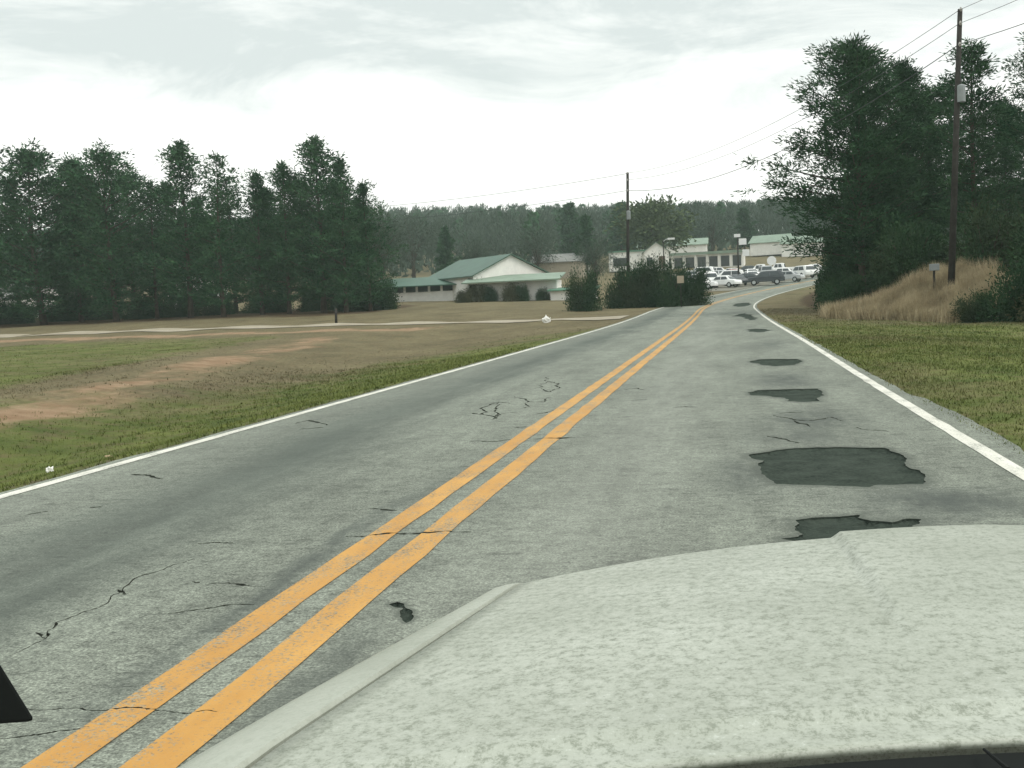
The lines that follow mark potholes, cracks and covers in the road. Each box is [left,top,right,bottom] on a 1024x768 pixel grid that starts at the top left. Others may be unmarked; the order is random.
crack [168,604,254,614]
crack [472,377,561,442]
pothole [389,602,414,623]
crack [767,412,884,443]
crack [10,542,233,656]
